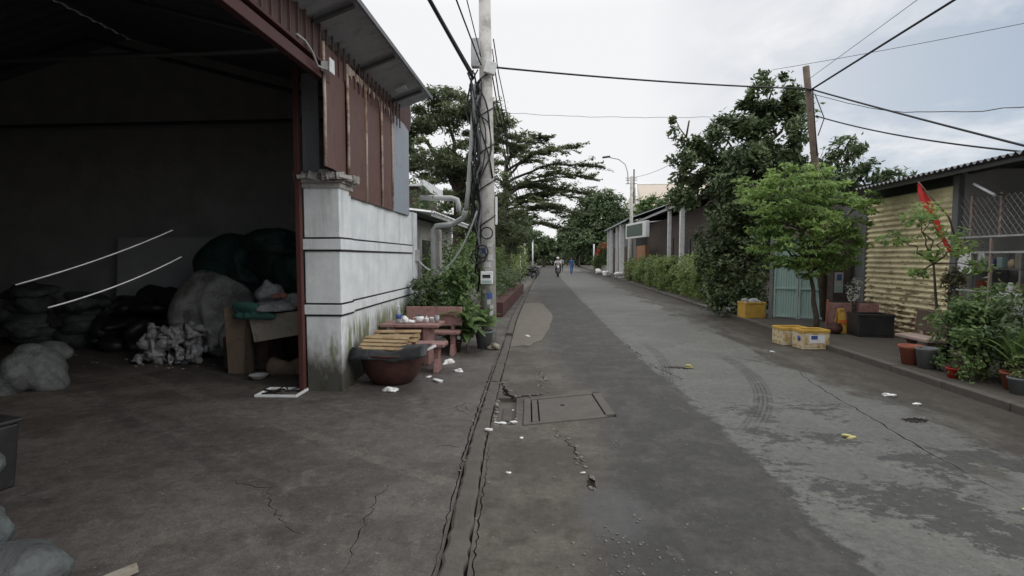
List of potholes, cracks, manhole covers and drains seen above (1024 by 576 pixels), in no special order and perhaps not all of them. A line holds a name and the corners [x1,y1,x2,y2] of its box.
crack [234,480,299,534]
manhole cover [523,392,615,426]
crack [627,344,685,382]
crack [797,370,1020,501]
crack [431,351,549,576]
crack [552,429,588,468]
crack [340,486,388,574]
